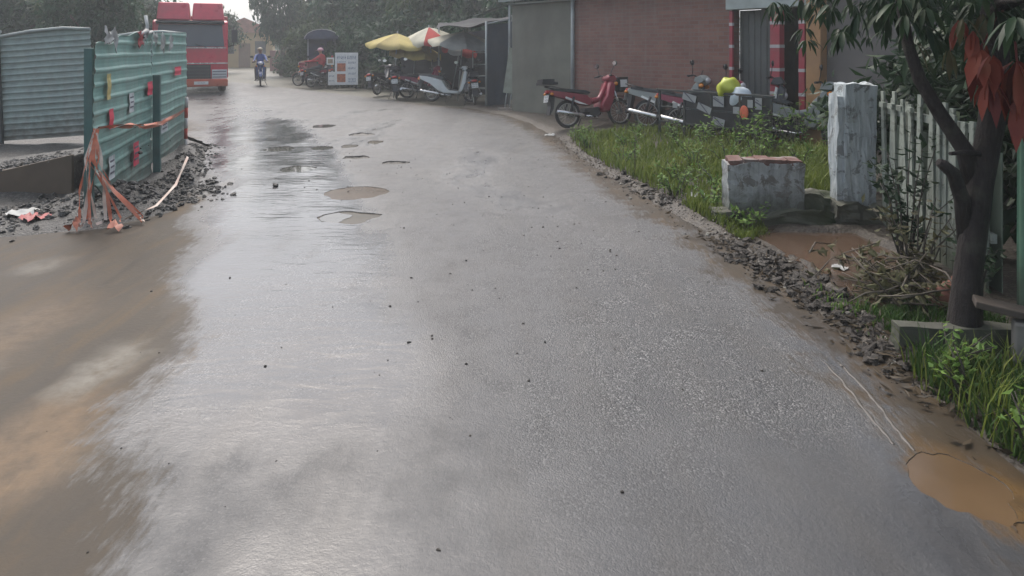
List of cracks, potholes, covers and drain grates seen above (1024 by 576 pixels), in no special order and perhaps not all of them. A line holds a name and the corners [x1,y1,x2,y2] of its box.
pothole [317,211,382,224]
pothole [906,451,1018,527]
pothole [324,186,389,200]
